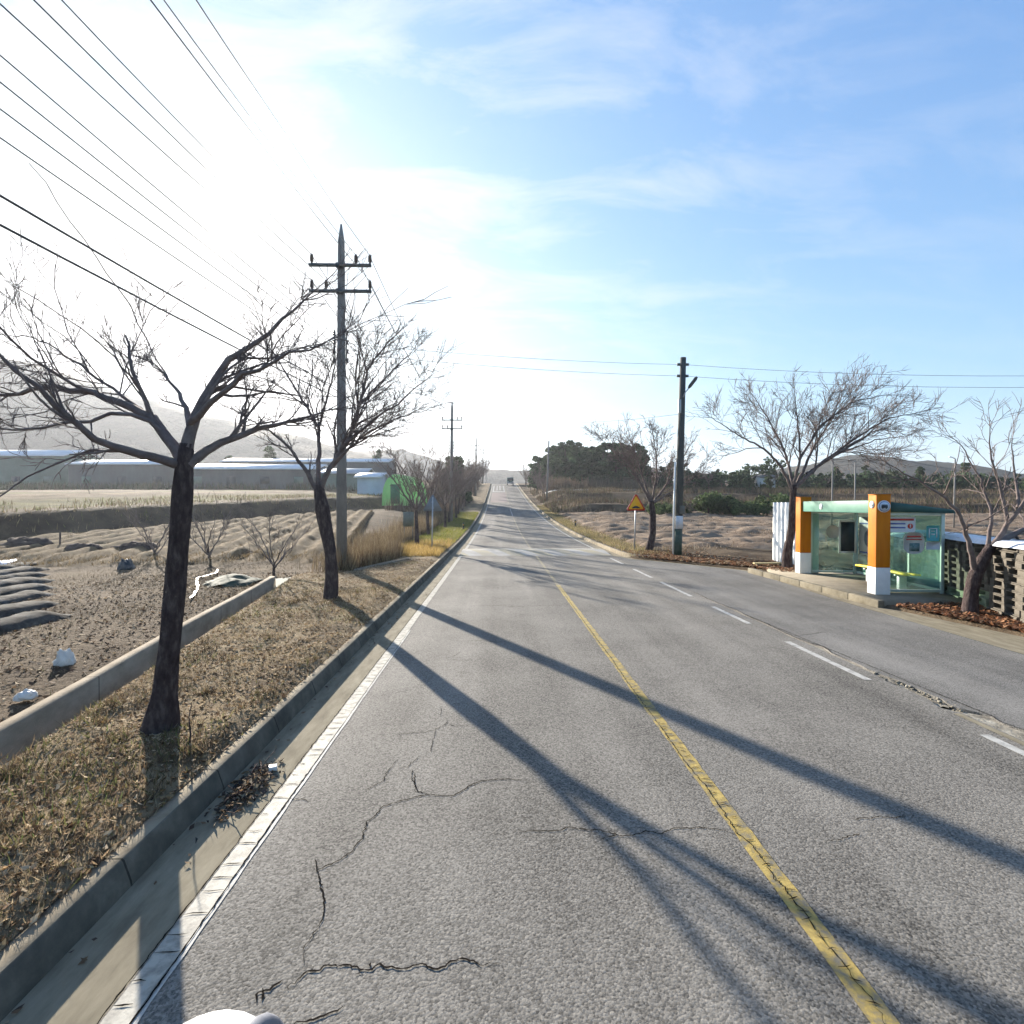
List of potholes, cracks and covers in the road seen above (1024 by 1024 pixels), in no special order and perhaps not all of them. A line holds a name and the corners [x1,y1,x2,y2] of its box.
crack [522,826,736,838]
crack [255,708,526,1024]
